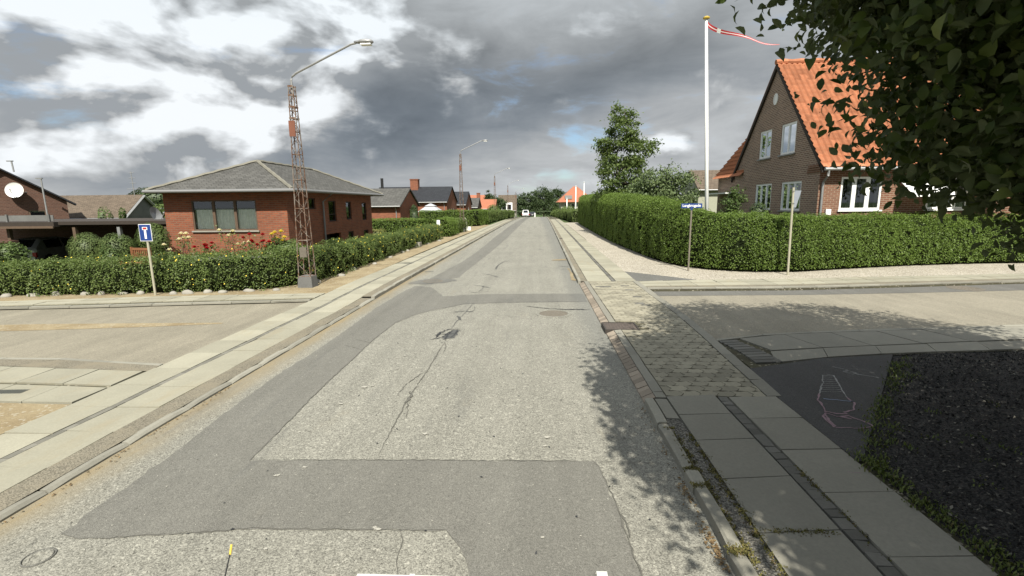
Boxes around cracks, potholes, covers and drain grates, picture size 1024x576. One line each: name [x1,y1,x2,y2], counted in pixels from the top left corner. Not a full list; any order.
crack [381,260,514,450]
manhole cover [19,547,57,568]
manhole cover [535,309,572,318]
